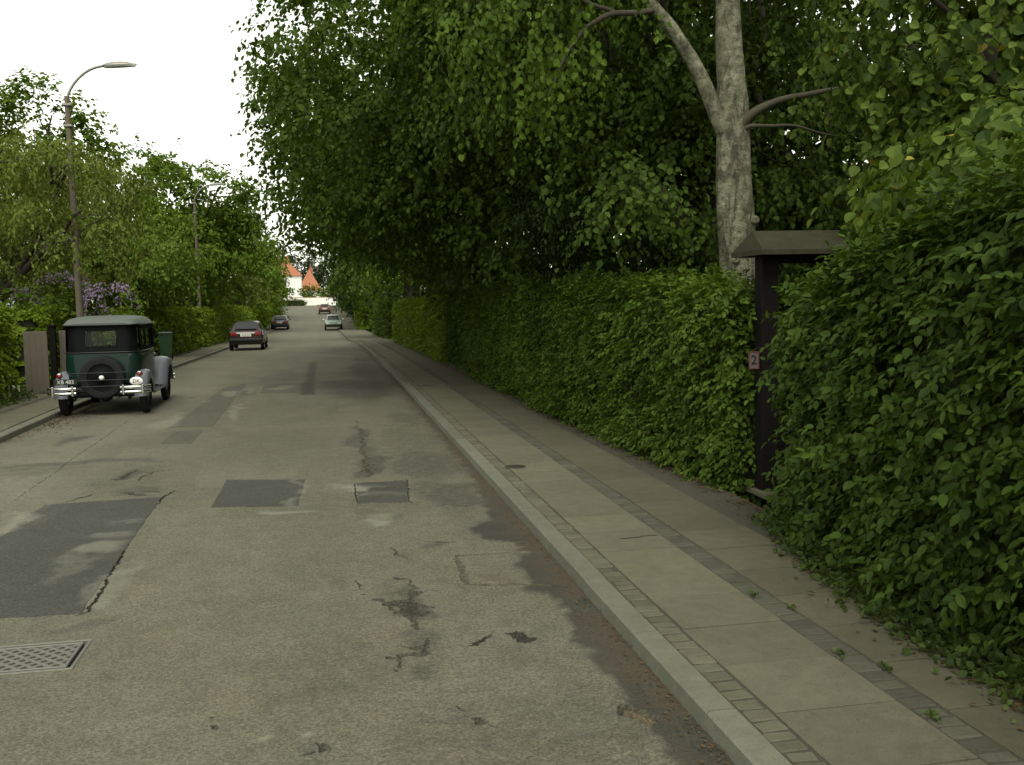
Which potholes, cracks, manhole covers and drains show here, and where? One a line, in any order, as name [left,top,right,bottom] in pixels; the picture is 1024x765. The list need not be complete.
crack [342,537,561,679]
crack [0,415,182,620]
pothole [489,626,554,649]
crack [348,420,421,506]
